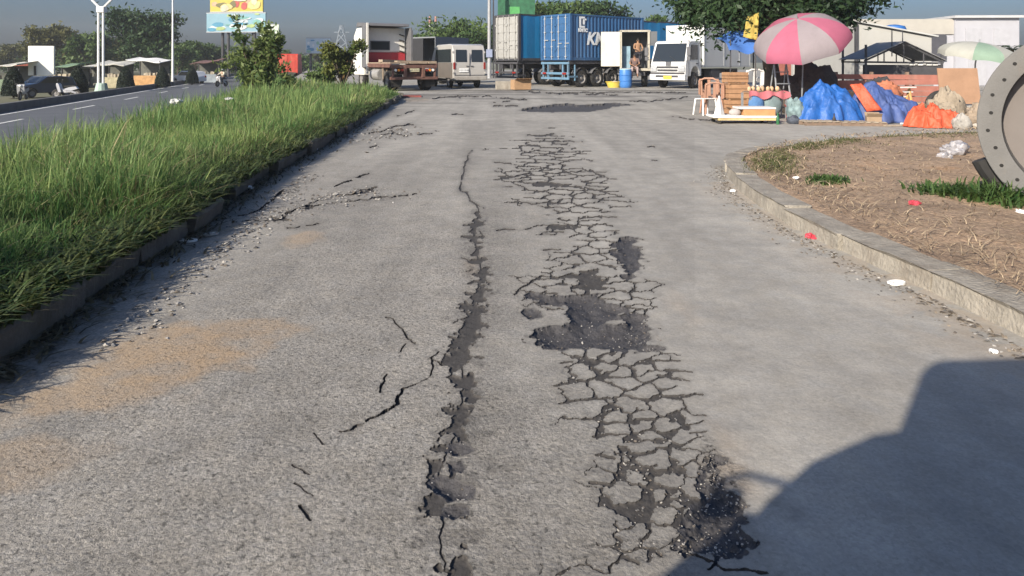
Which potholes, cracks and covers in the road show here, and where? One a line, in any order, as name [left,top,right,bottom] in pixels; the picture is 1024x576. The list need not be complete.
crack [236,173,417,229]
pothole [670,445,760,563]
crack [484,127,665,329]
crack [522,339,769,576]
crack [313,316,441,445]
pothole [522,103,630,113]
pothole [608,236,645,281]
crack [369,110,433,148]
pothole [524,292,666,354]
